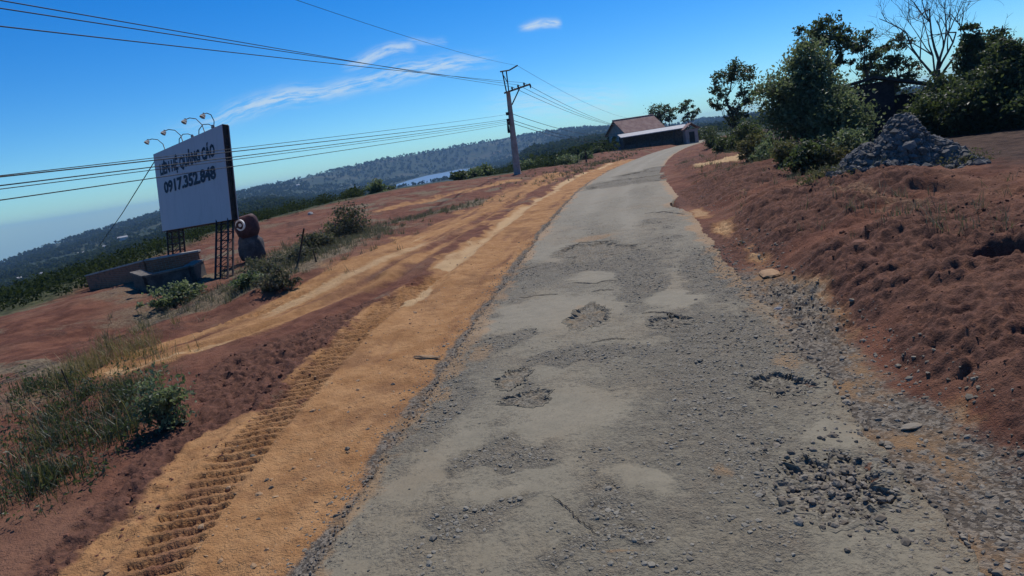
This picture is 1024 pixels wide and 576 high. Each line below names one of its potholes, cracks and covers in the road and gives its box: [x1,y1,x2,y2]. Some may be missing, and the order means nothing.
pothole [491,367,535,392]
pothole [763,446,913,534]
crack [551,495,600,535]
pothole [645,313,701,329]
pothole [496,388,555,408]
pothole [561,301,612,332]
pothole [746,371,823,398]
